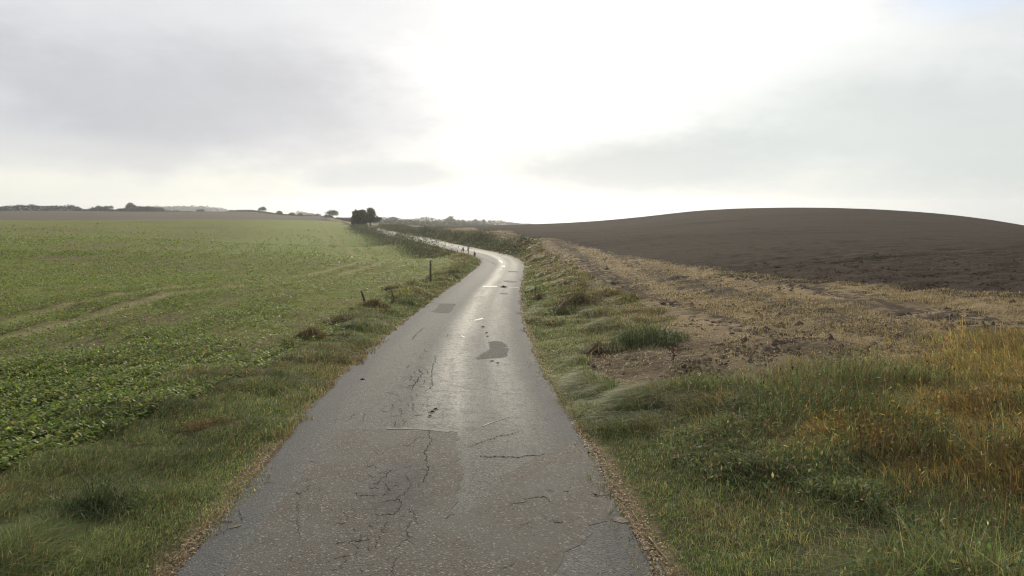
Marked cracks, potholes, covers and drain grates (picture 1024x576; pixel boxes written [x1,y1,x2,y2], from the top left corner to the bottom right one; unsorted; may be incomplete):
crack [325,329,437,575]
